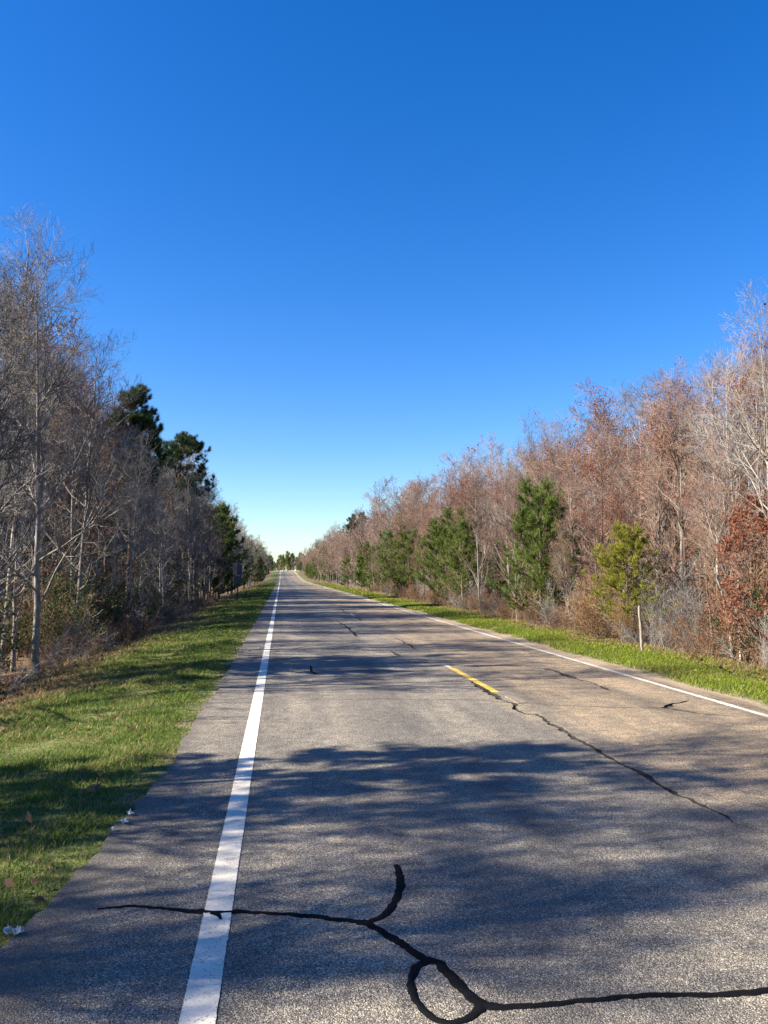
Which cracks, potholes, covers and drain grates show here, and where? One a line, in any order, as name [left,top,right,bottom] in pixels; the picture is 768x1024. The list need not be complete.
crack [337,668,765,833]
crack [338,607,362,637]
